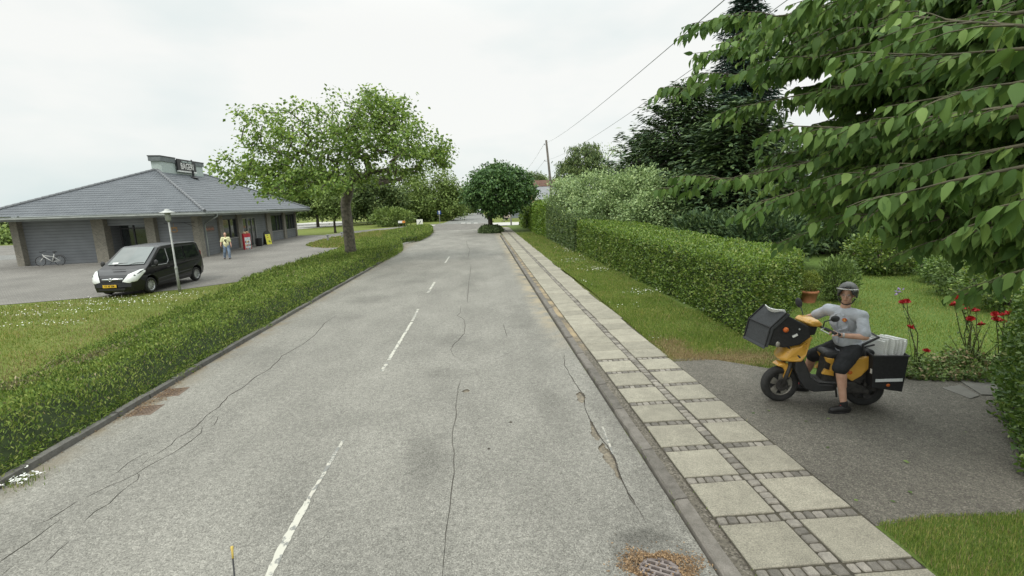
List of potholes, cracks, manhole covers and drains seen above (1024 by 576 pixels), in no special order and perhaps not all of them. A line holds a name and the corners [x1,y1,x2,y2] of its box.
crack [451,241,471,357]
crack [0,316,335,570]
crack [442,383,460,576]
drain grate [639,557,683,576]
